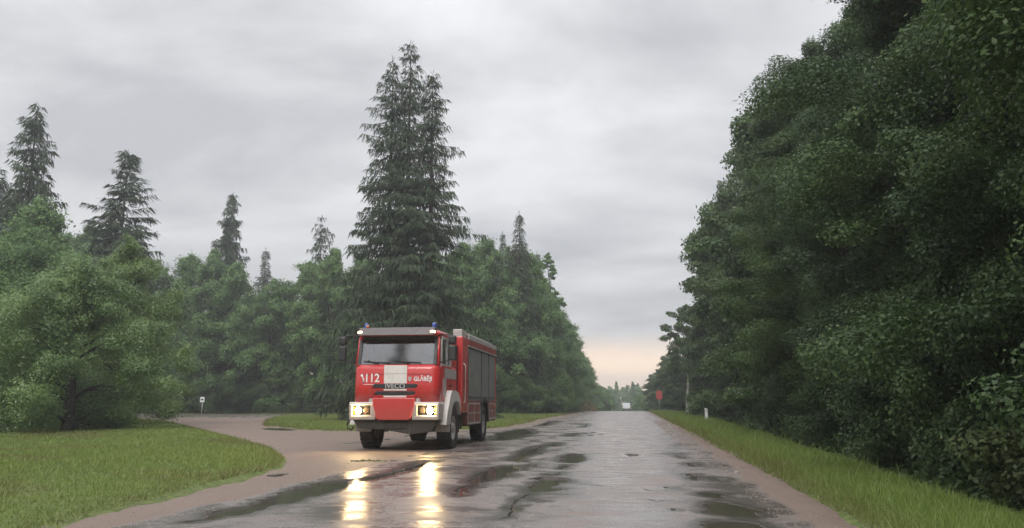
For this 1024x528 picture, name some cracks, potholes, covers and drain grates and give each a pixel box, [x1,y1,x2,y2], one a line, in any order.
crack [502,494,546,519]
pothole [454,466,521,497]
pothole [559,453,587,463]
pothole [508,446,542,462]
